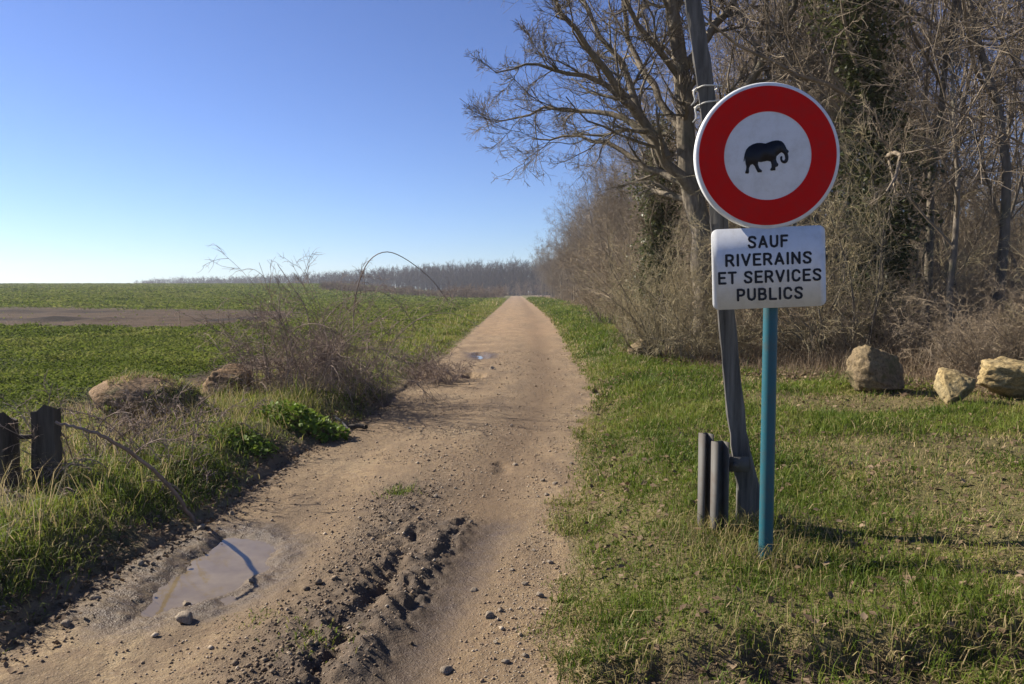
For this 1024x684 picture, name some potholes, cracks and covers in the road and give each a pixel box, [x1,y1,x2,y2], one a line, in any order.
pothole [108,528,289,628]
